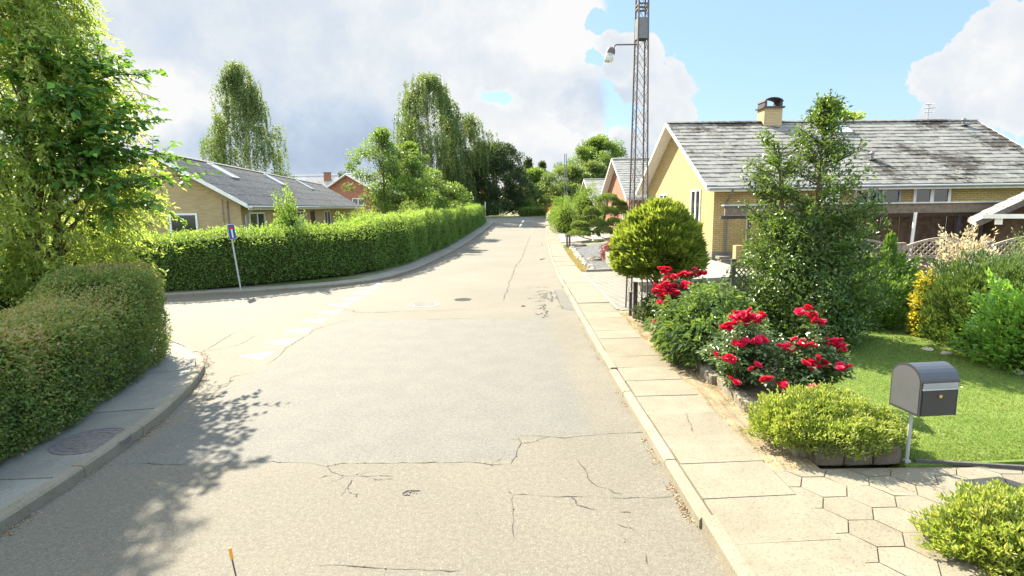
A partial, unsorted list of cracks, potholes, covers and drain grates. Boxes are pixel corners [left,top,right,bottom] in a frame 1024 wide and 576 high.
crack [331,564,457,572]
manhole cover [48,427,131,455]
crack [274,237,542,360]
crack [147,459,503,496]
crack [511,461,670,541]
